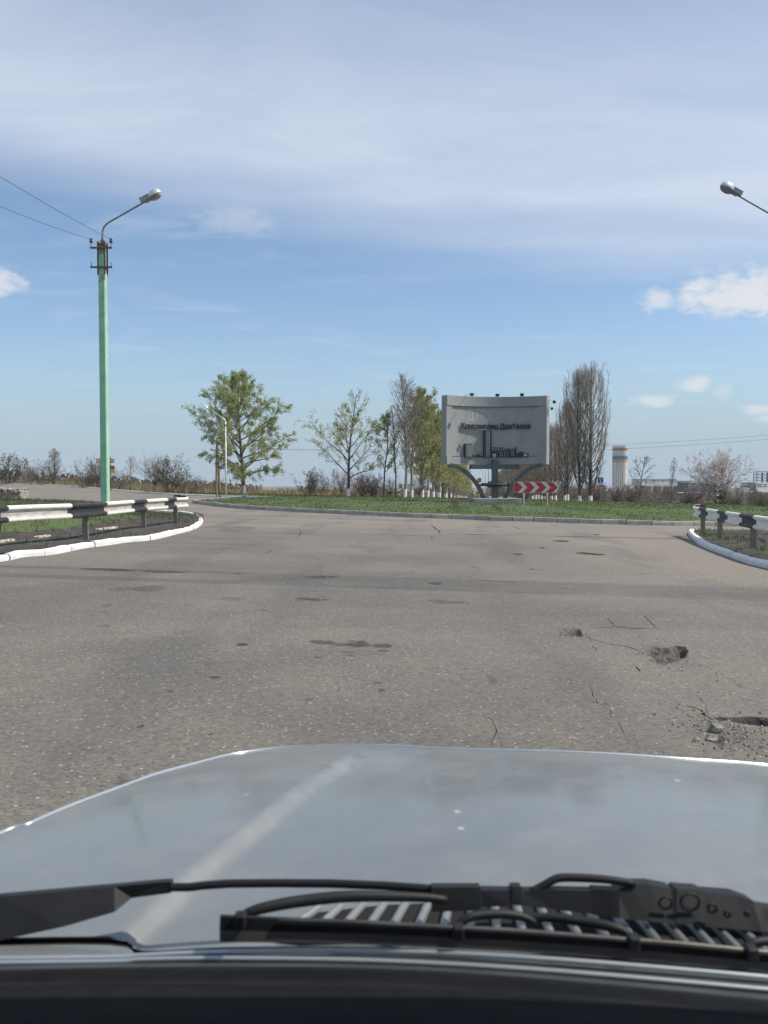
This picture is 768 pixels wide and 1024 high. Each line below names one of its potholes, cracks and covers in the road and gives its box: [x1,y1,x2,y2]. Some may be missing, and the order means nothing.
crack [585,616,659,672]
pothole [714,716,768,727]
pothole [642,646,689,665]
pothole [560,629,583,637]
